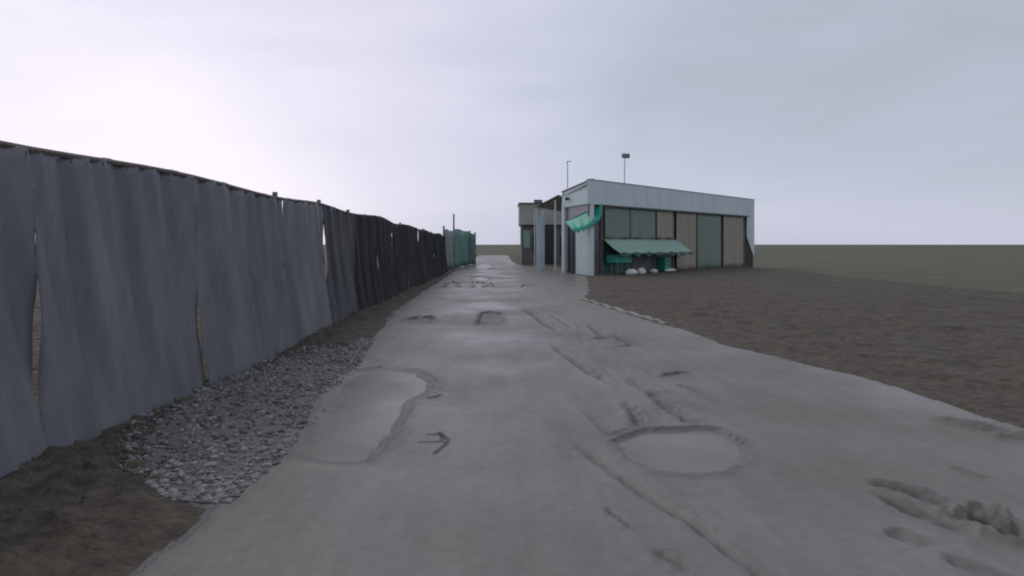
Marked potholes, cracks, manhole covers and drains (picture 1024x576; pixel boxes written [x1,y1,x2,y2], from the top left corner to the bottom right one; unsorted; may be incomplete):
pothole [402,315,438,324]
crack [417,432,451,455]
pothole [473,311,507,326]
pothole [441,280,494,288]
pothole [604,423,758,477]
